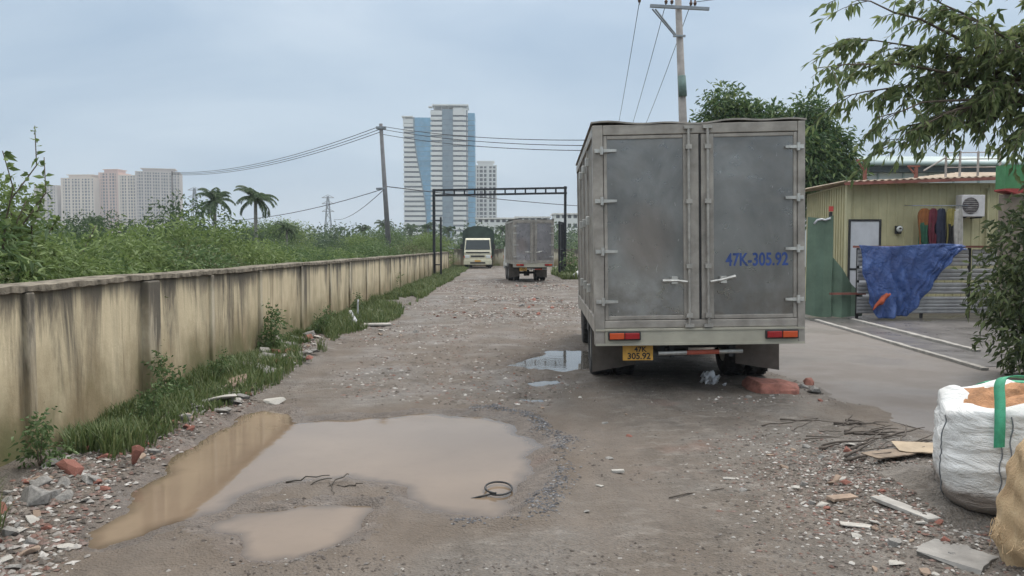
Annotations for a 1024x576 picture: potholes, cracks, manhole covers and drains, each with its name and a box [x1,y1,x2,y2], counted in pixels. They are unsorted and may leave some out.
pothole [181,494,390,564]
pothole [498,347,588,372]
pothole [48,402,564,553]
pothole [522,376,565,387]
